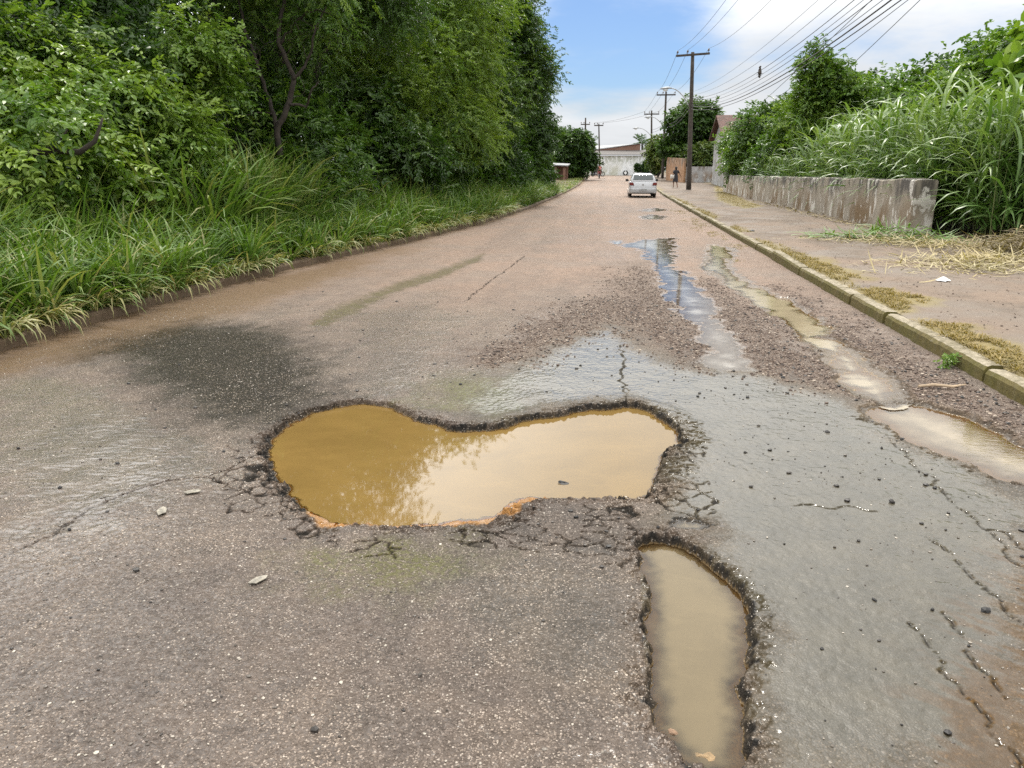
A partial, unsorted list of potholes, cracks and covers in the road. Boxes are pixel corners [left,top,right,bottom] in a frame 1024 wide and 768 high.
crack [790,503,879,512]
crack [886,435,1024,768]
crack [11,438,720,568]
pothole [850,399,1024,486]
pothole [631,531,761,768]
pothole [253,397,695,532]
crack [463,256,525,302]
crack [617,345,631,402]
